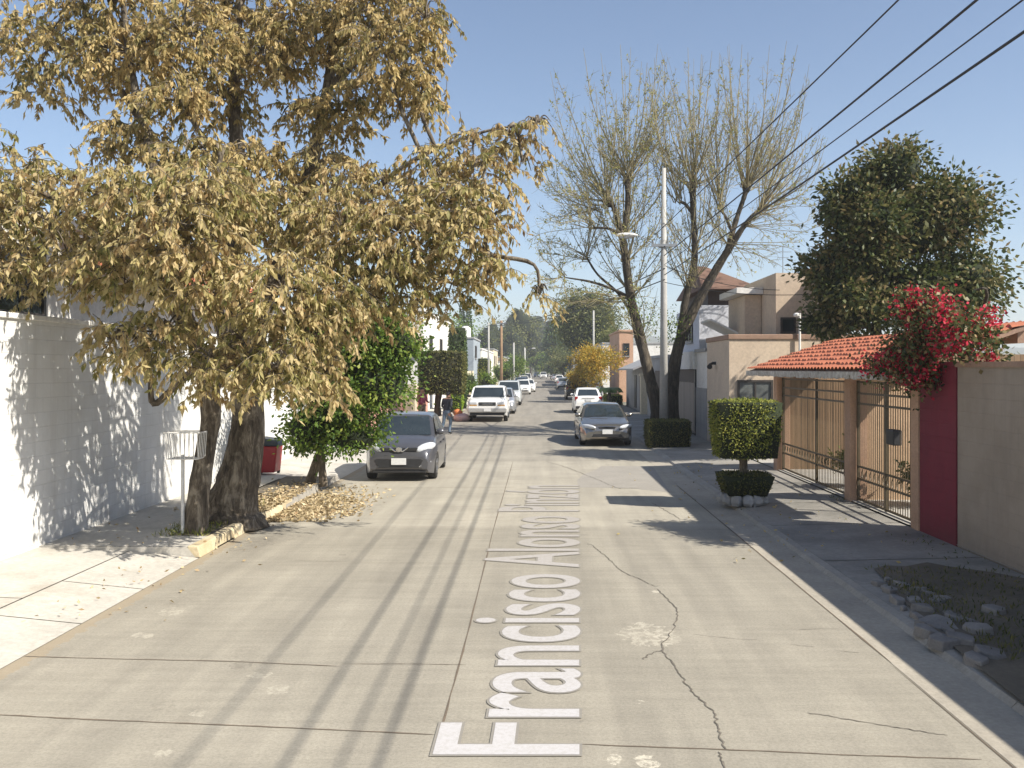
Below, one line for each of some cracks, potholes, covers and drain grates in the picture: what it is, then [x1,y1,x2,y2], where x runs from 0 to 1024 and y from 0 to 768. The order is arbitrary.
crack [587,543,727,768]
crack [810,713,946,735]
